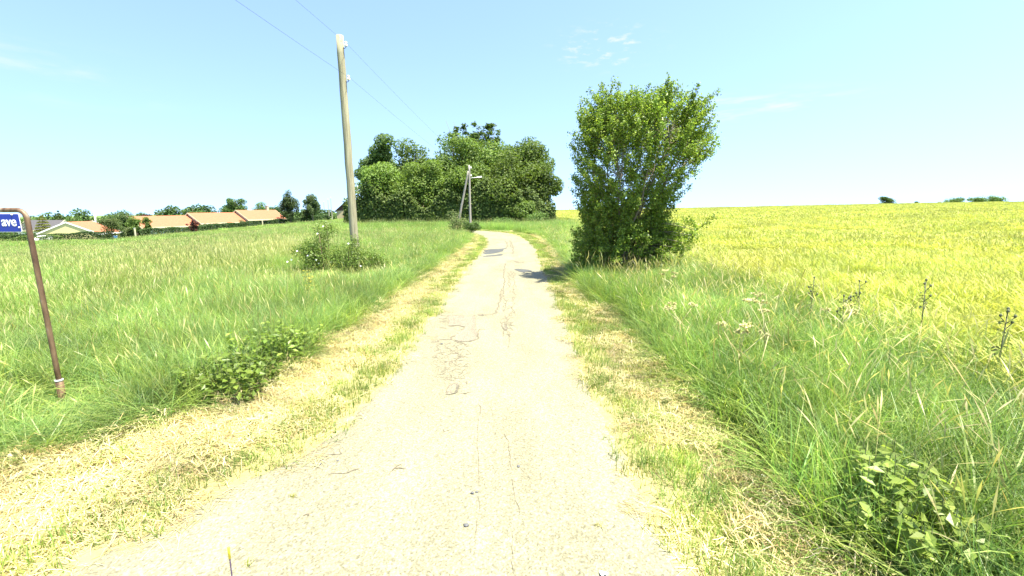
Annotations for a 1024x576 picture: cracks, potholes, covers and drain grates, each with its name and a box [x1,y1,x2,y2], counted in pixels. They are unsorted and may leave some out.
crack [434,241,545,413]
